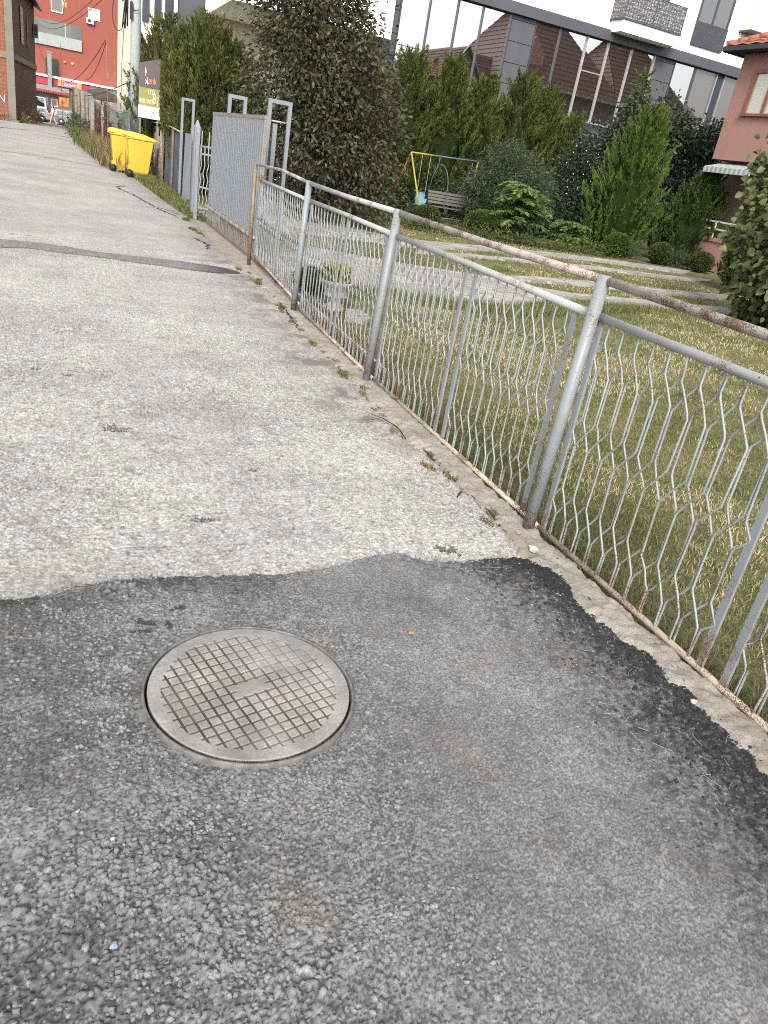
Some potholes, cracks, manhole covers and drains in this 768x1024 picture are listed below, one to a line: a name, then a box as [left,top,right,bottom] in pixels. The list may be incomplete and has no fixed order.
manhole cover [136,625,355,770]
crack [366,412,405,437]
